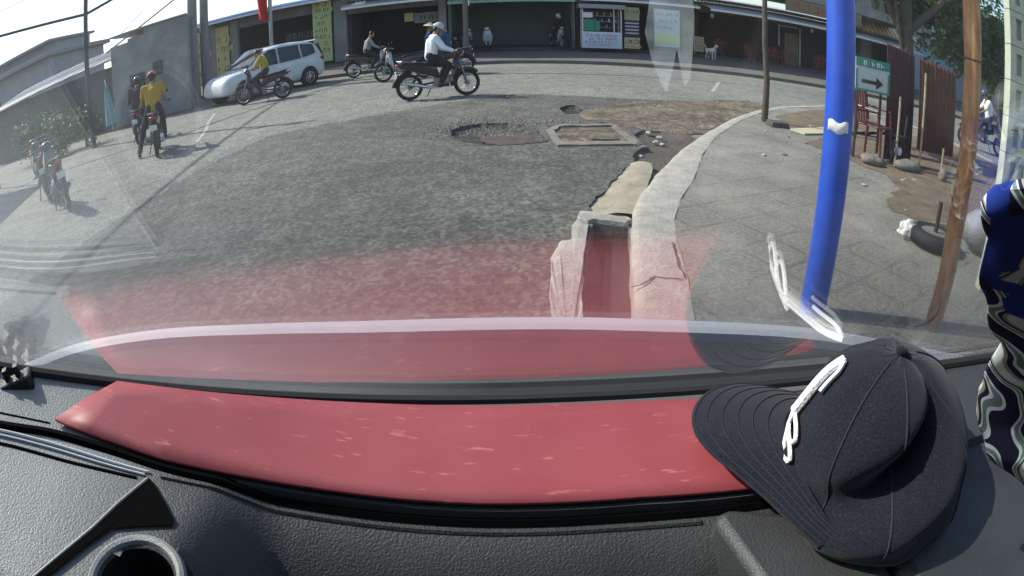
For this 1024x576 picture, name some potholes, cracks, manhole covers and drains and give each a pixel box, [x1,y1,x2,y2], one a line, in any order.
pothole [632,130,696,171]
manhole cover [546,124,639,147]
pothole [449,123,548,145]
pothole [559,105,582,114]
crack [631,276,681,288]
